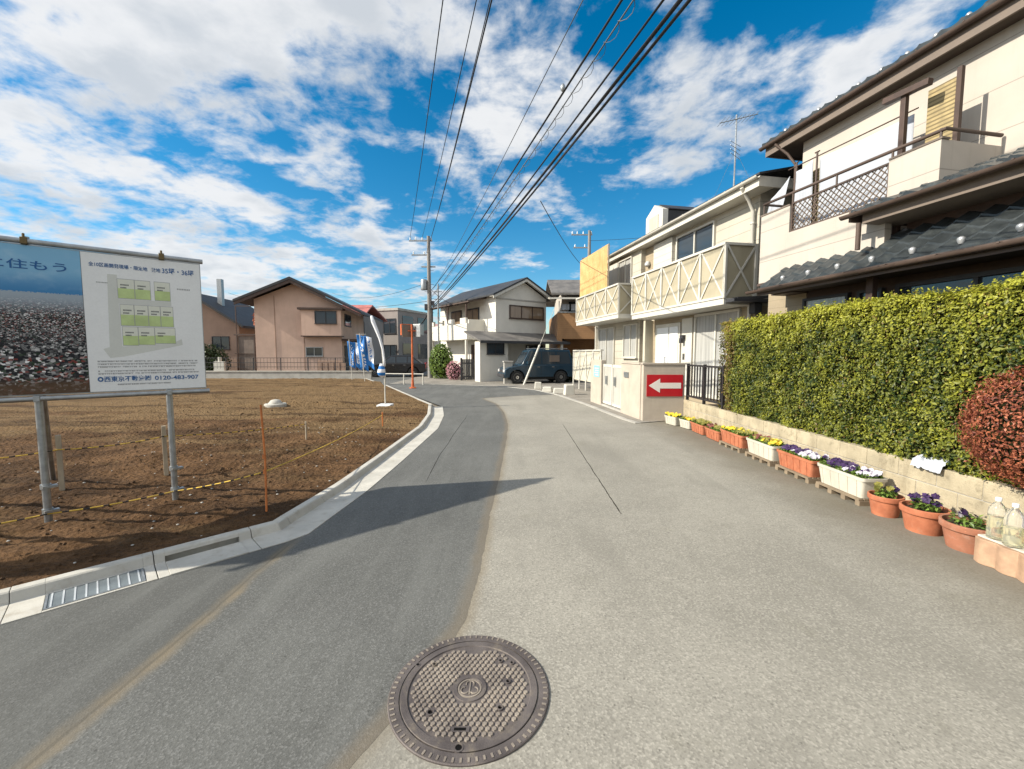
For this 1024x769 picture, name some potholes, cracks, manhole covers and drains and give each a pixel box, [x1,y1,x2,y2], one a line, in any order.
manhole cover [387,635,549,767]
drain grate [43,568,146,611]
